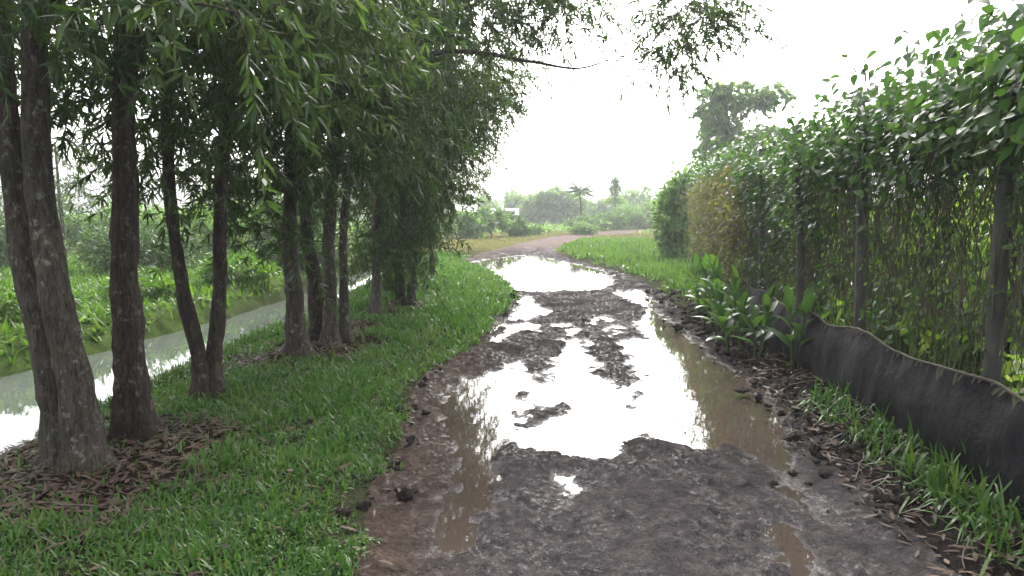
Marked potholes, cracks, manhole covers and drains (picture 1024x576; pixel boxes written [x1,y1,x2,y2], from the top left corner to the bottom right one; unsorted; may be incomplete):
pothole [413,287,821,559]
pothole [468,254,616,292]
